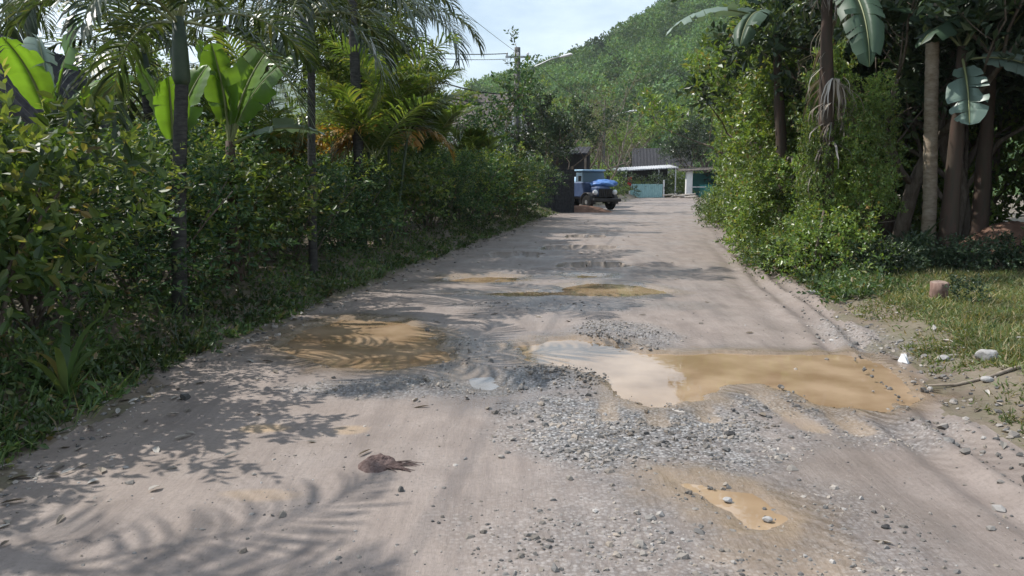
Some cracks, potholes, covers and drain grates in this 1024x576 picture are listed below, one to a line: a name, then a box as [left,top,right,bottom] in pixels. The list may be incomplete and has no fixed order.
pothole [507,334,928,413]
pothole [269,315,460,371]
pothole [441,273,532,283]
pothole [555,261,632,269]
pothole [654,467,806,535]
pothole [461,281,677,297]
